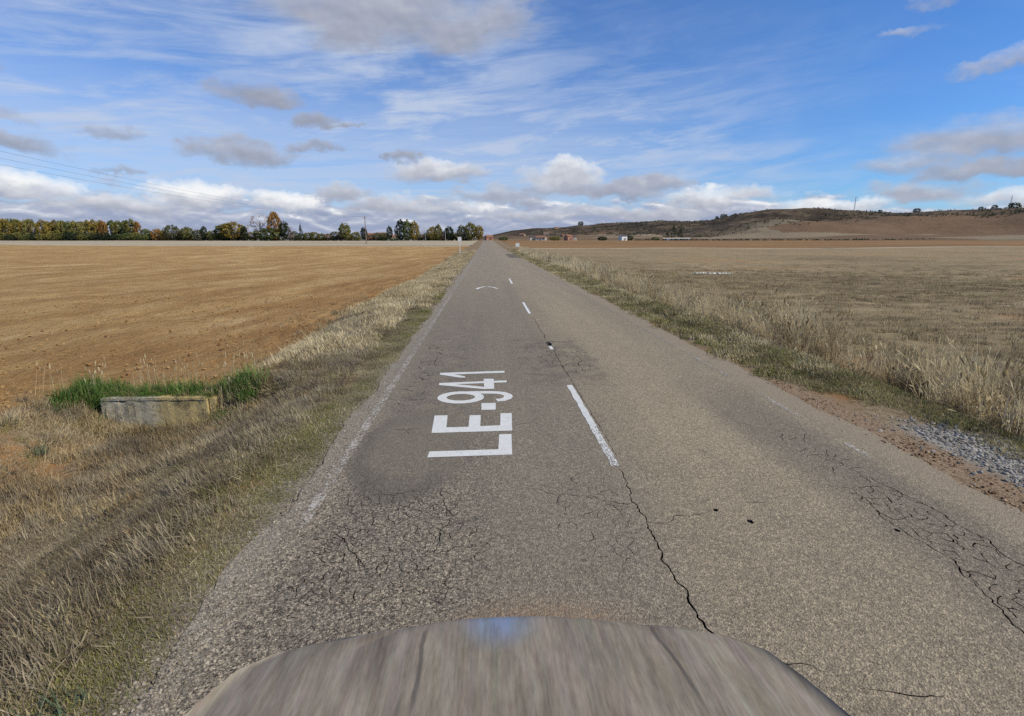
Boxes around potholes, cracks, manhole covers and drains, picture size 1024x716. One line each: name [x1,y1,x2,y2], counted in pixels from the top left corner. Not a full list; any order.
crack [858,687,942,697]
crack [280,489,491,613]
crack [517,340,591,373]
crack [540,470,714,634]
crack [780,434,1024,633]
